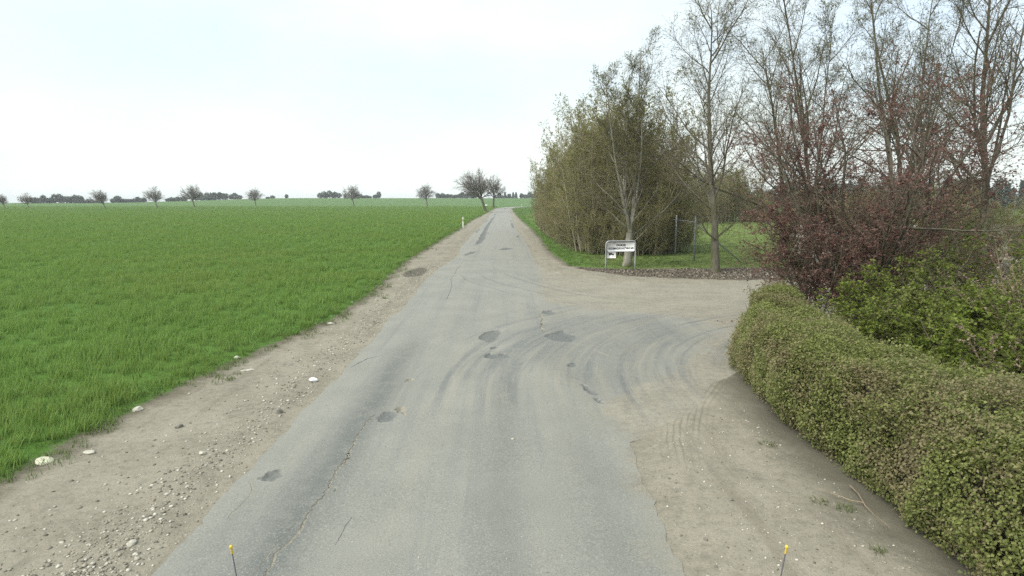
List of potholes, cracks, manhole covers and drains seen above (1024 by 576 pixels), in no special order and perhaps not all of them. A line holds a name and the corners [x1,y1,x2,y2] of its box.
pothole [545,330,577,342]
pothole [478,330,502,343]
crack [228,415,374,576]
pothole [376,410,398,423]
pothole [257,468,284,482]
